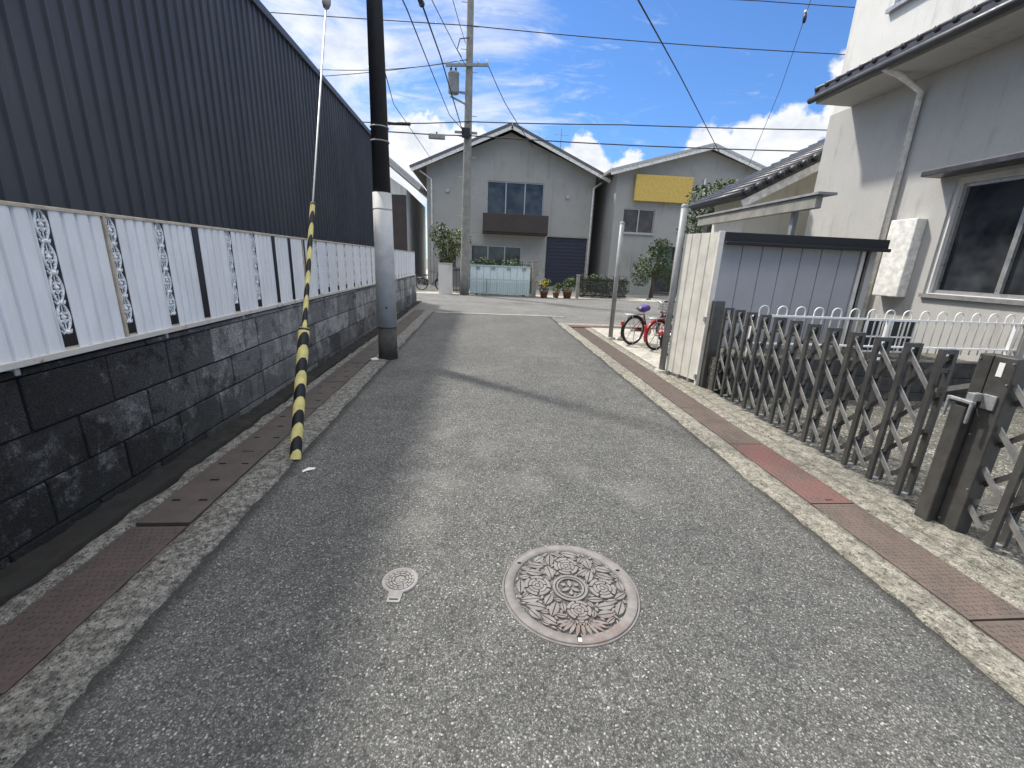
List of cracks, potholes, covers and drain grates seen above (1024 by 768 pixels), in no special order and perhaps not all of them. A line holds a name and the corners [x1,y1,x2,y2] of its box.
manhole cover [502,545,640,648]
utility cover [382,568,419,603]
